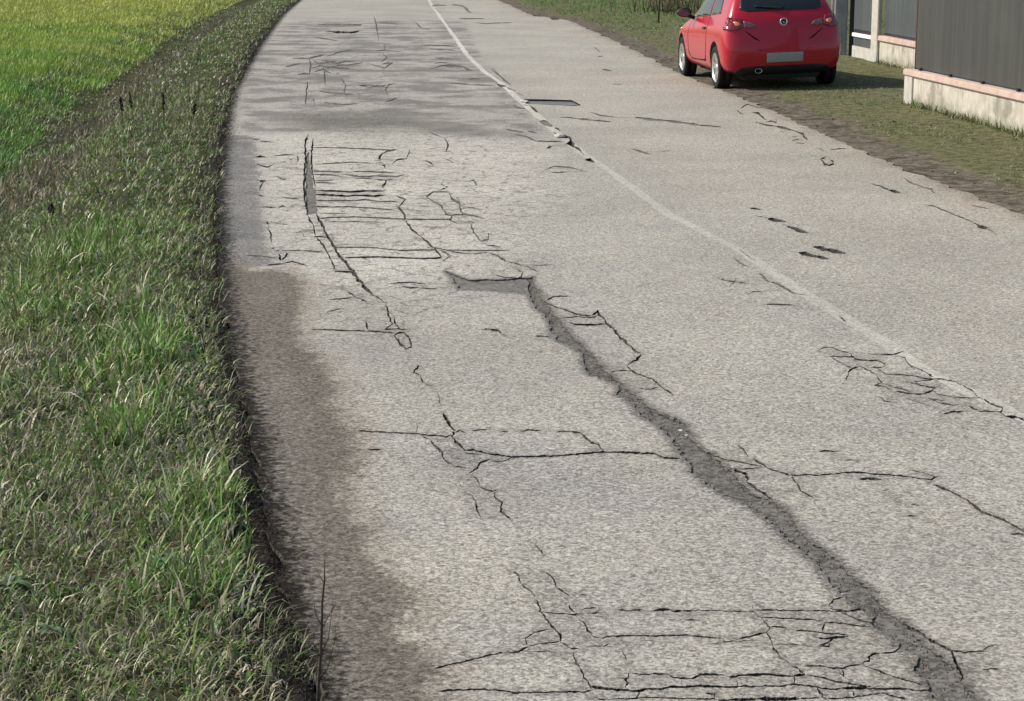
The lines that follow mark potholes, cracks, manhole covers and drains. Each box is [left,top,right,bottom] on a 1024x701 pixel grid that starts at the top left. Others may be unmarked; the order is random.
crack [714,445,1024,535]
crack [873,178,997,234]
crack [245,132,679,520]
crack [820,347,1024,421]
crack [737,104,846,166]
crack [435,544,997,701]
crack [286,17,401,105]
